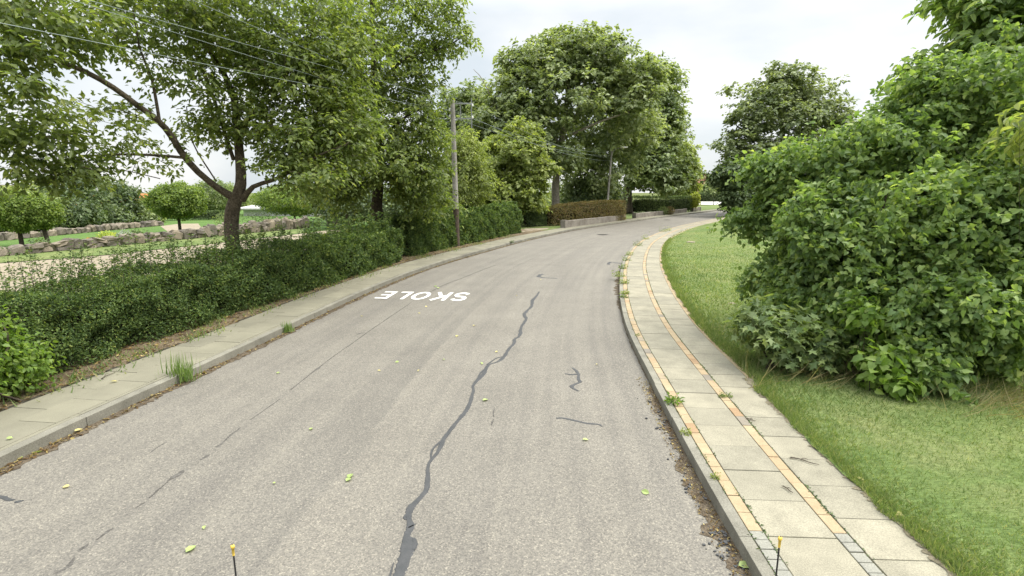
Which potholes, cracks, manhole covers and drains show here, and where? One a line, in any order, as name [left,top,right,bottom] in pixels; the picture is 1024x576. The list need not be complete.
crack [53,265,495,574]
